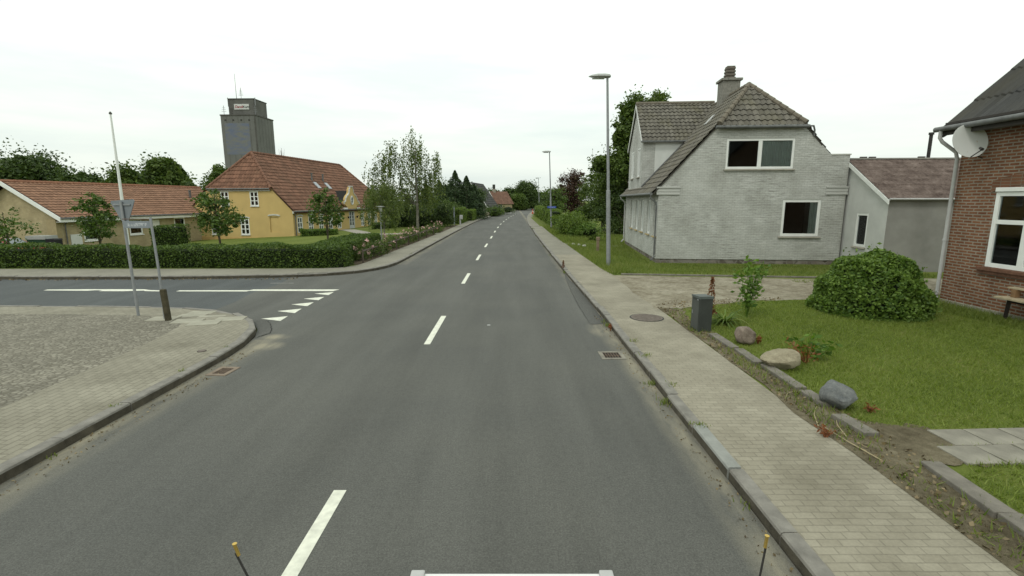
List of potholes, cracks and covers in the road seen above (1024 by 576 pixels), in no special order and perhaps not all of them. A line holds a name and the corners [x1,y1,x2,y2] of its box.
manhole cover [630,314,664,322]
drain grate [598,351,627,360]
drain grate [205,366,241,376]
